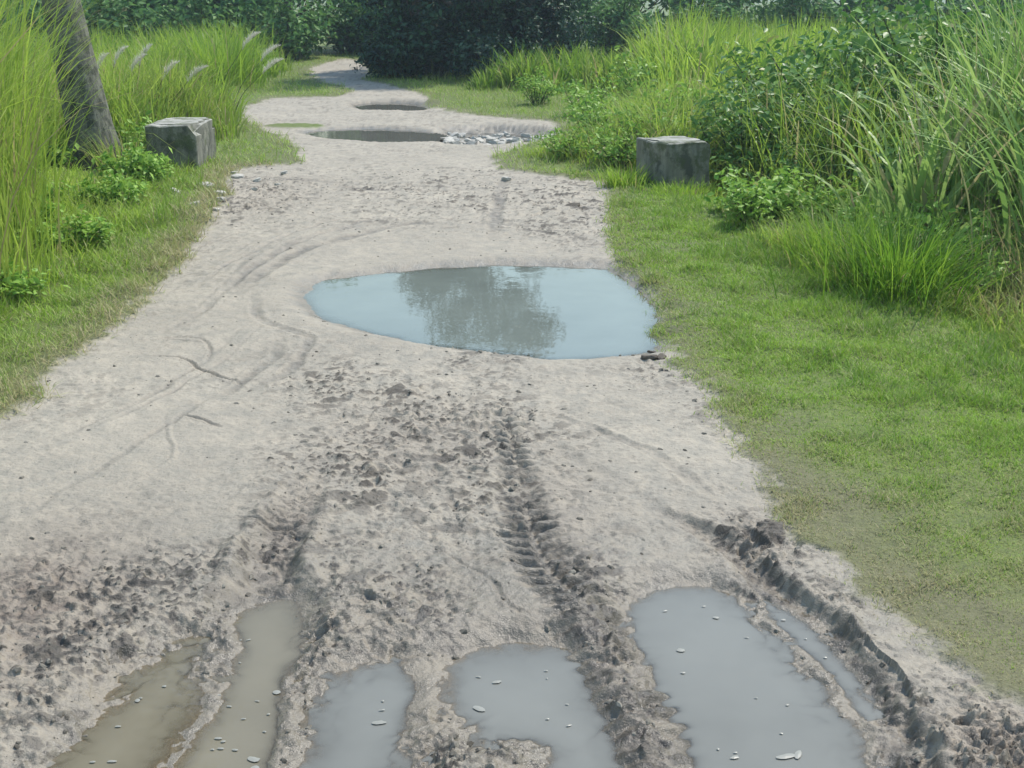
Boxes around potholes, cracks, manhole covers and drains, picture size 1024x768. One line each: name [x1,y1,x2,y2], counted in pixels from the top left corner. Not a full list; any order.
pothole [349,99,432,111]
pothole [297,631,461,768]
pothole [297,125,449,142]
pothole [139,581,336,768]
pothole [0,614,211,768]
pothole [438,618,657,768]
pothole [291,258,676,360]
pothole [594,566,916,768]
